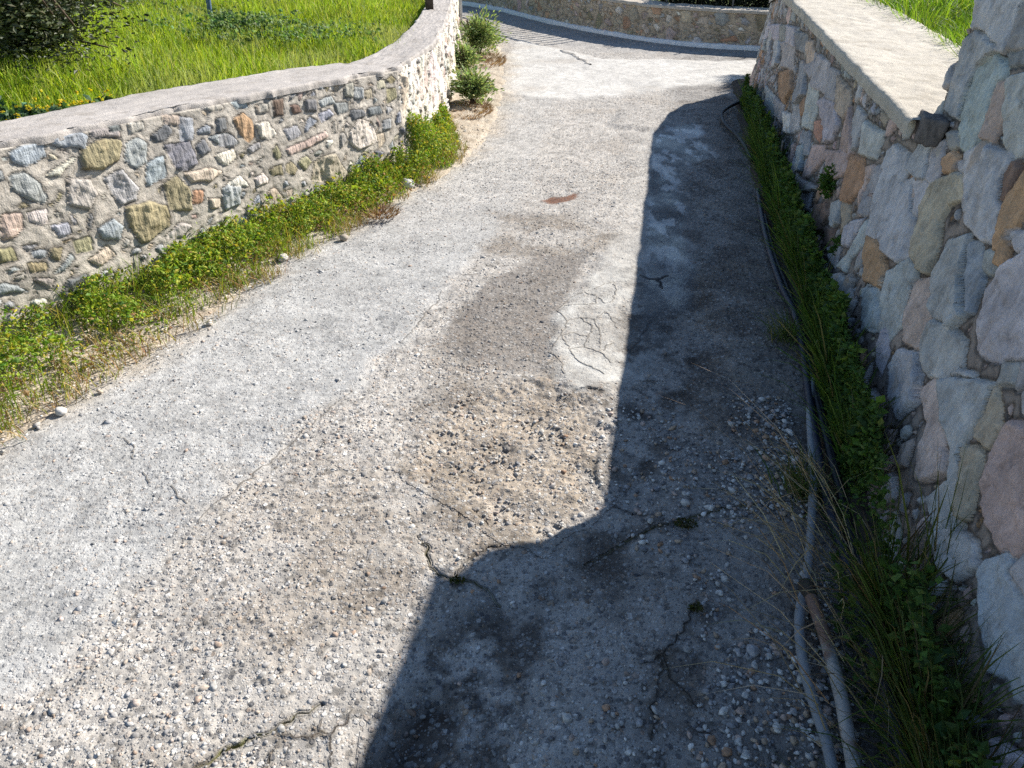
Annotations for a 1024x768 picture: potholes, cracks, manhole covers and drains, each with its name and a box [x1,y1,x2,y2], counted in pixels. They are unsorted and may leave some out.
crack [560,50,591,65]
crack [640,599,713,740]
crack [417,480,510,608]
crack [641,275,669,289]
crack [170,485,188,504]
crack [548,282,652,391]
crack [117,436,150,483]
crack [265,709,353,768]
